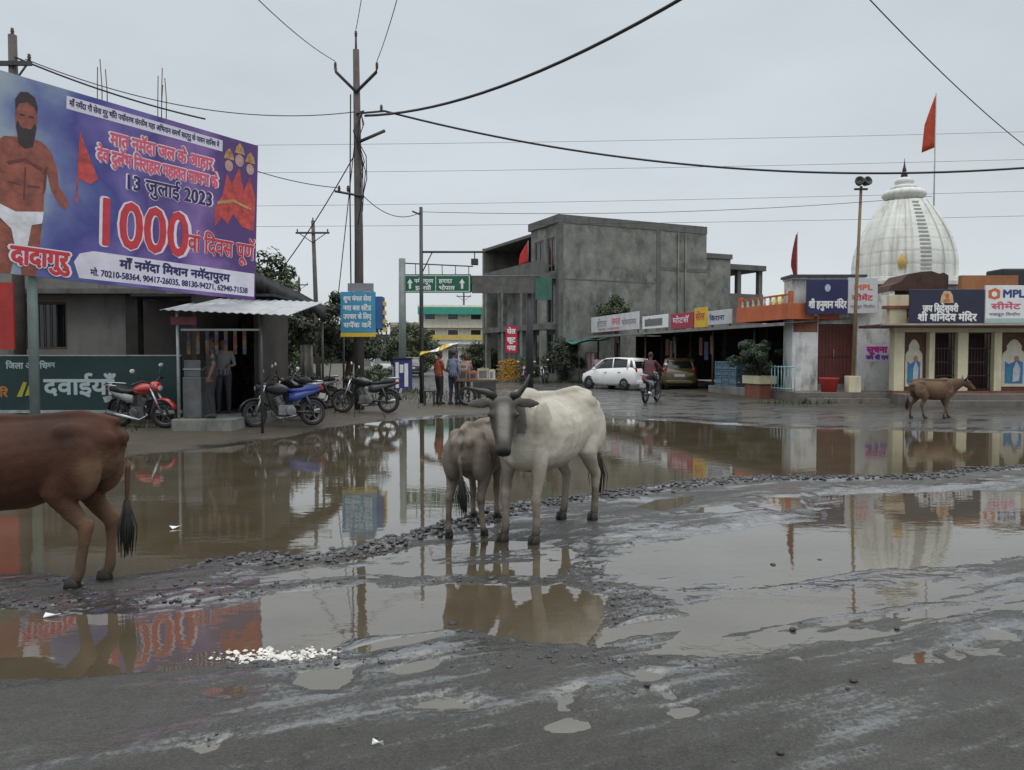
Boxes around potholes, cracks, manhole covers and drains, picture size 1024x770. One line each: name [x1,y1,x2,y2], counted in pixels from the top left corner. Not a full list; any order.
pothole [535,710,605,736]
pothole [284,662,366,692]
pothole [0,415,1024,578]
pothole [662,701,712,720]
pothole [0,579,617,681]
